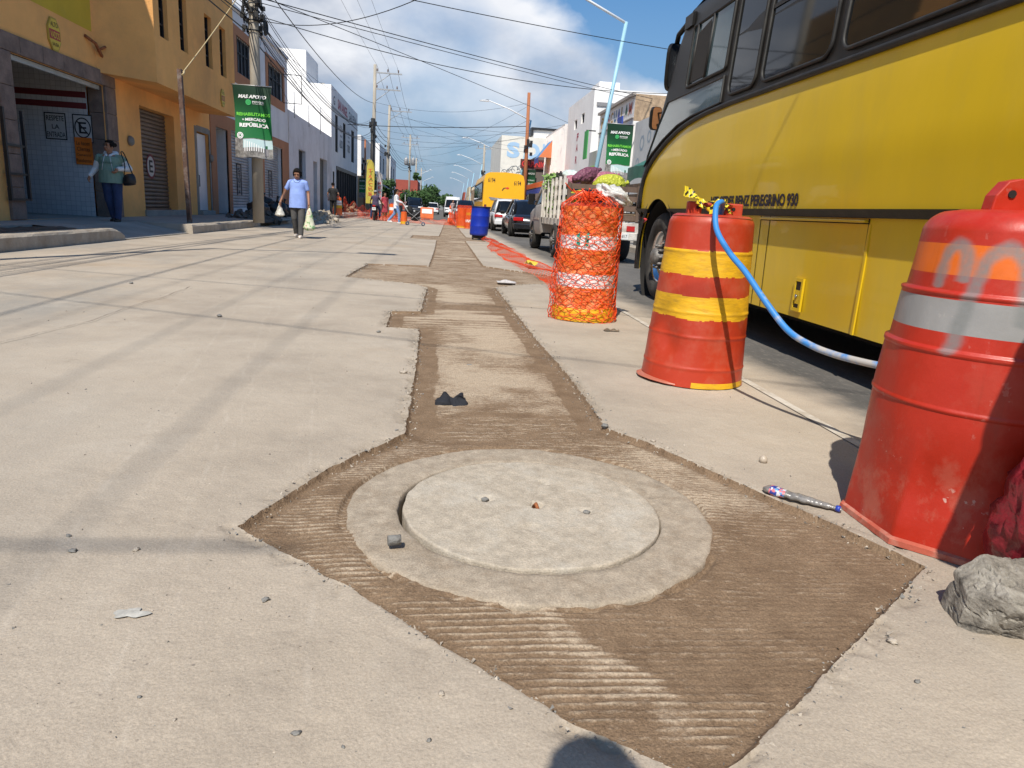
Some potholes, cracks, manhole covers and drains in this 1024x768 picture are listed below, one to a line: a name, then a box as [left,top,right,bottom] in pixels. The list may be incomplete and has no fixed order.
manhole cover [346,449,713,611]
